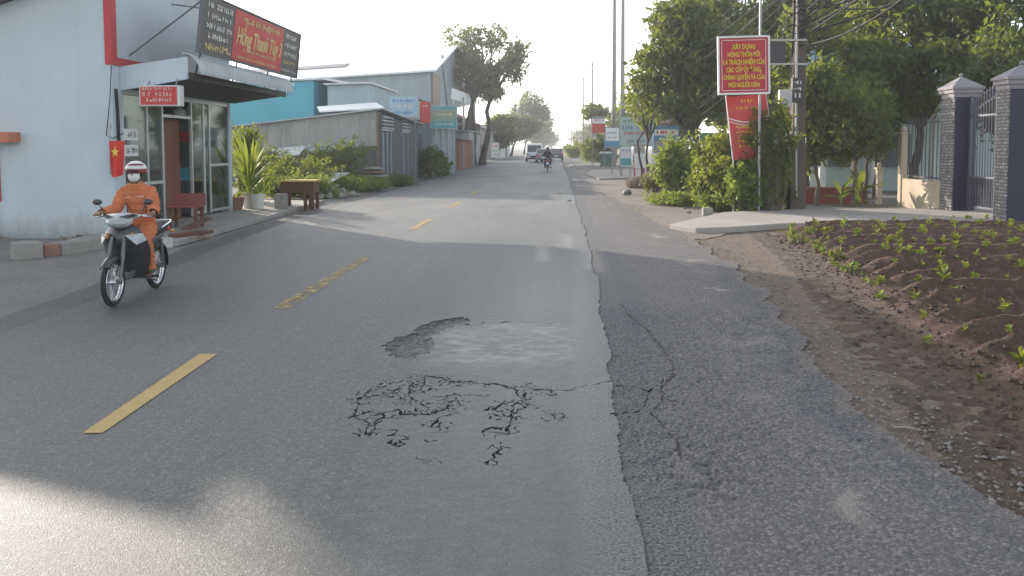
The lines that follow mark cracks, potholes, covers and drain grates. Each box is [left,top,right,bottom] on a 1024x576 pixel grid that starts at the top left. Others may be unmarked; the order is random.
crack [340,374,614,466]
pothole [381,317,471,358]
crack [609,304,683,461]
